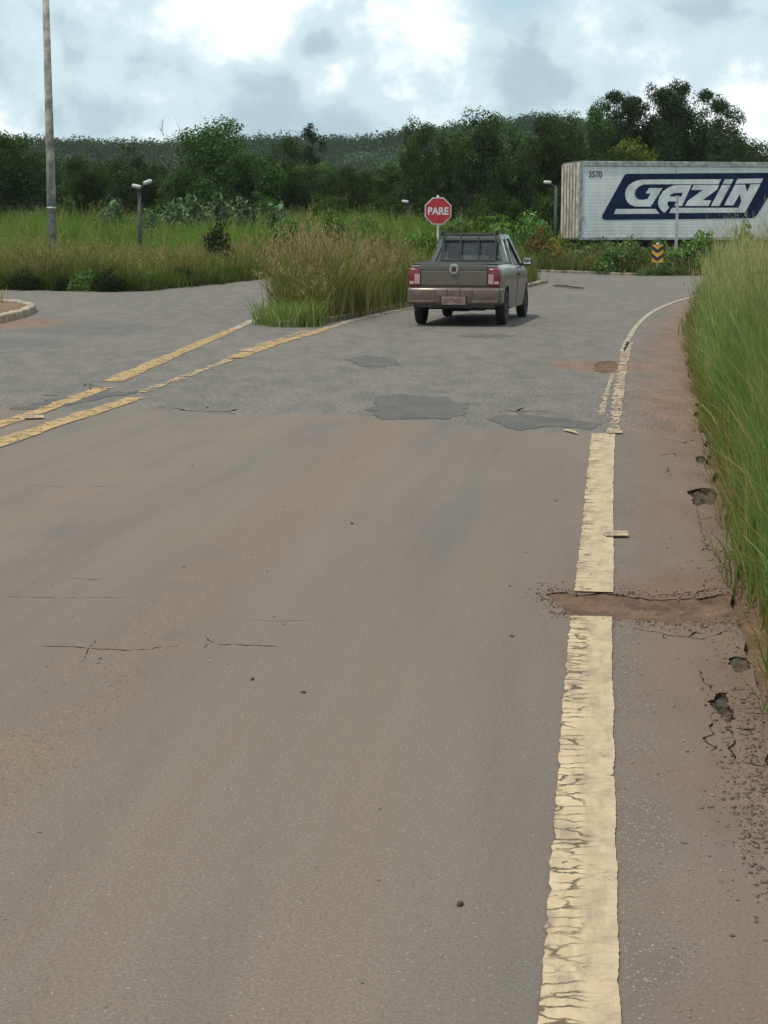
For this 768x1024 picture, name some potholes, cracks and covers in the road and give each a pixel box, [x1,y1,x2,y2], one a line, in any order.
pothole [729,656,751,673]
pothole [708,693,735,723]
pothole [688,488,717,506]
crack [700,673,758,766]
